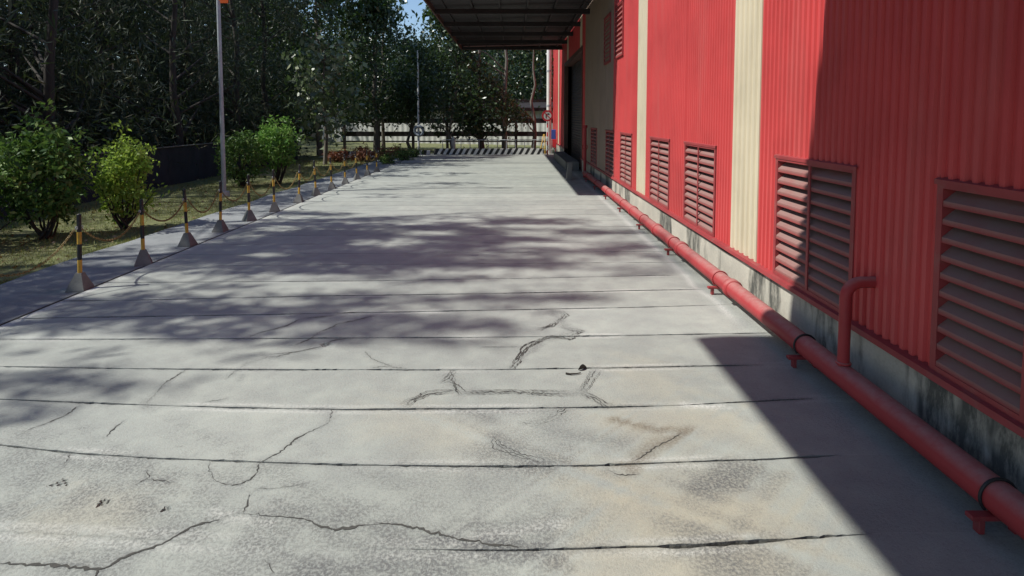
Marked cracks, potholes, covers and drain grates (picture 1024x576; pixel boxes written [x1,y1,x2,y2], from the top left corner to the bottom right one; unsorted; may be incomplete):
crack [512,311,584,368]
crack [613,435,678,476]
crack [403,370,610,427]
crack [0,411,518,576]
